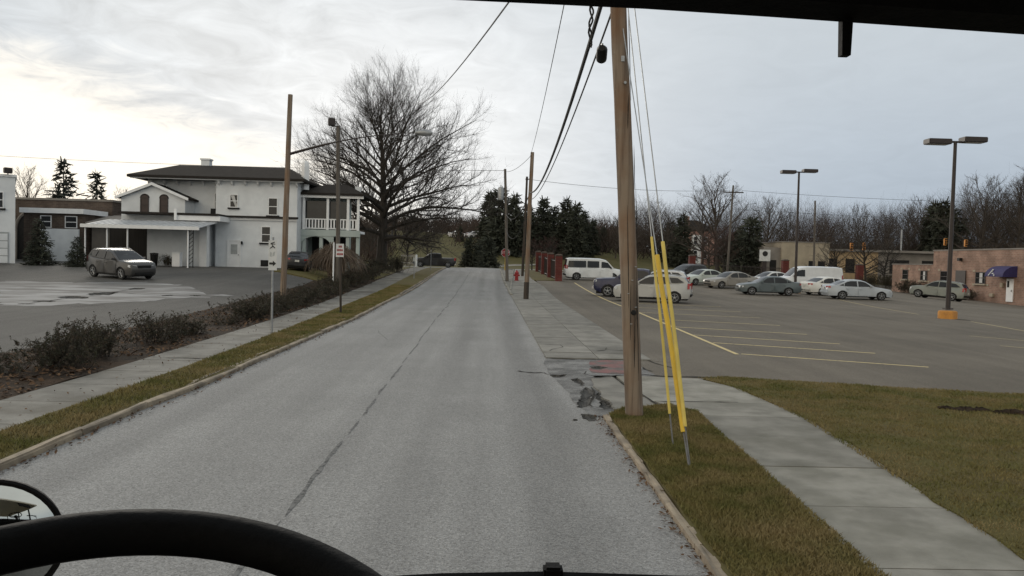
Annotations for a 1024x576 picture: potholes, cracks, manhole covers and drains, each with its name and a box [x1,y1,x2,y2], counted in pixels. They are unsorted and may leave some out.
pothole [576,387,594,408]
pothole [595,390,612,409]
crack [520,344,718,409]
